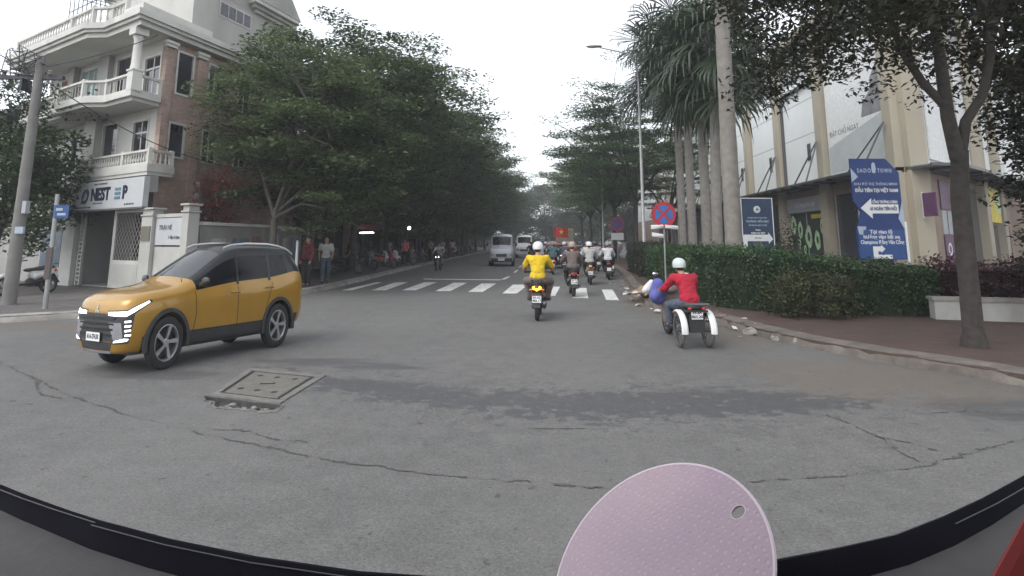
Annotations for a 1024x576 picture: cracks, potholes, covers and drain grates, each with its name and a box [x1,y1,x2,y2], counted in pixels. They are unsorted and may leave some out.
crack [827,415,938,462]
manhole cover [210,368,326,404]
